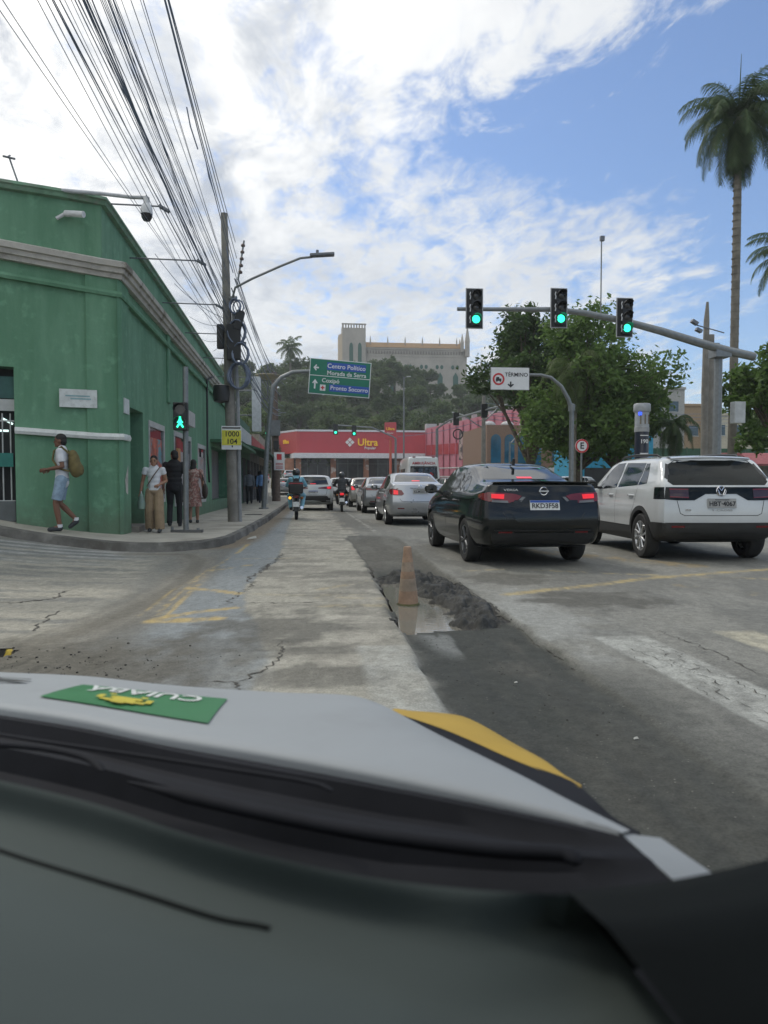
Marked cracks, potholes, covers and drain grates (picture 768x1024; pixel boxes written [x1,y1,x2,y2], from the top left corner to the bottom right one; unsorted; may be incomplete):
crack [219,553,350,607]
crack [1,589,80,631]
crack [216,641,285,690]
pothole [372,569,512,631]
